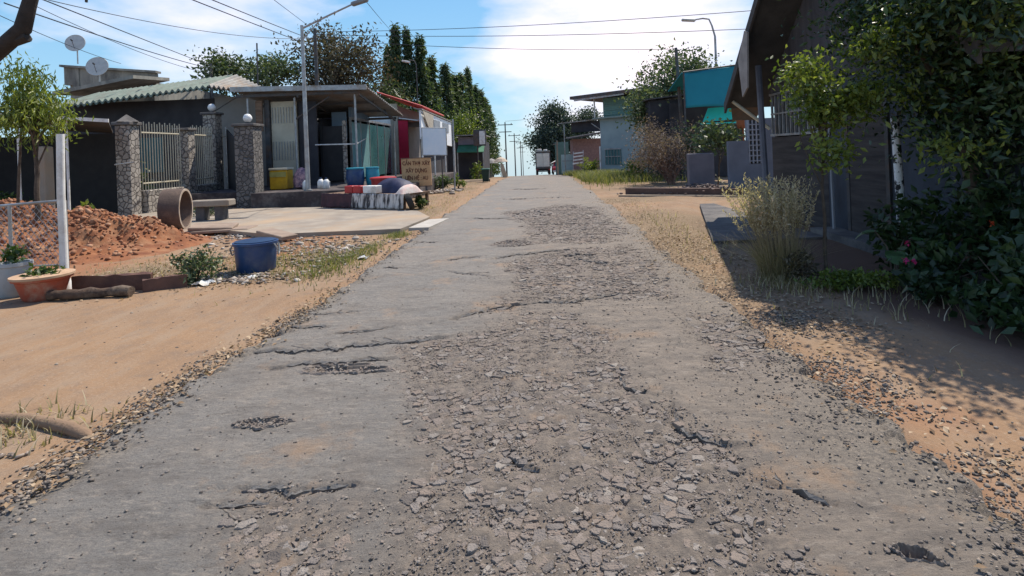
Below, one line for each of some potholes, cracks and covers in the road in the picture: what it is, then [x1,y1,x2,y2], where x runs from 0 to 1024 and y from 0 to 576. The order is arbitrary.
crack [196,472,386,576]
crack [255,188,829,576]
pothole [887,542,947,567]
pothole [490,239,538,247]
pothole [298,362,396,375]
pothole [231,415,296,431]
